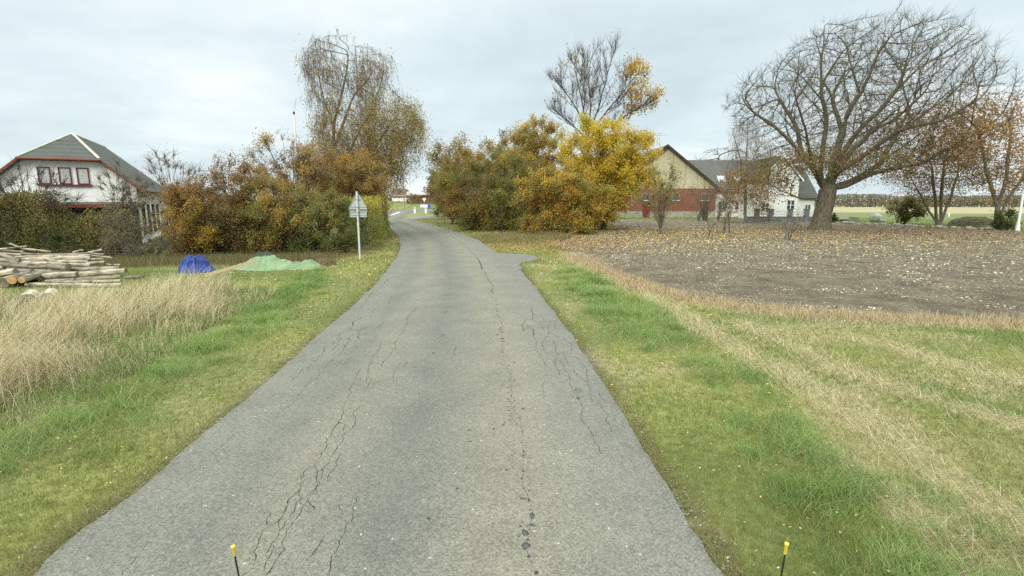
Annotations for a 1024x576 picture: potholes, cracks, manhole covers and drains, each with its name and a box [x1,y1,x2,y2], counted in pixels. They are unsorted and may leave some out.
crack [514,308,646,457]
crack [242,279,416,576]
